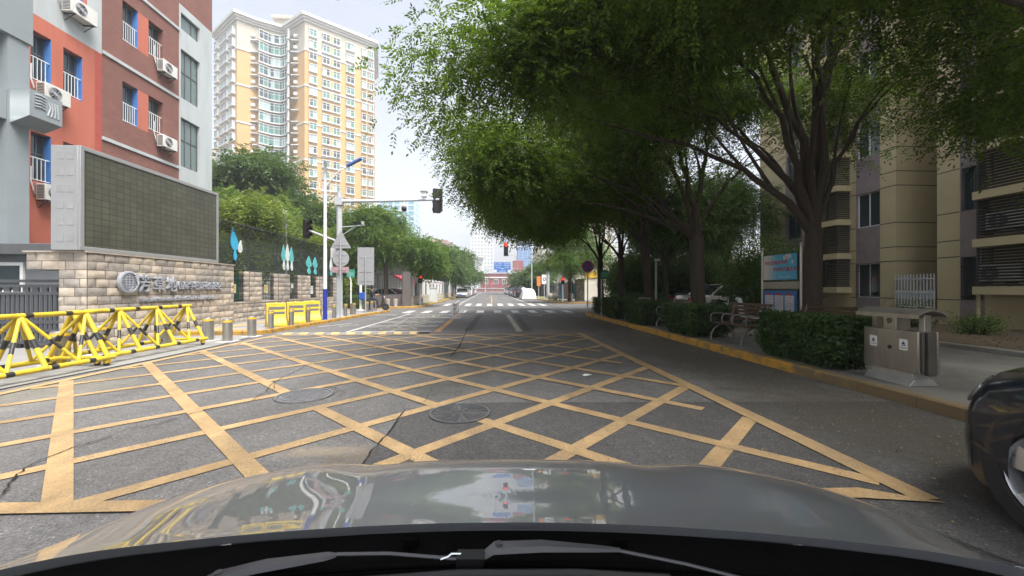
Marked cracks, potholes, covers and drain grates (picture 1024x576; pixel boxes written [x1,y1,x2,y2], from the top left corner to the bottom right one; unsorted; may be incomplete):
manhole cover [274,388,333,404]
manhole cover [429,403,490,424]
